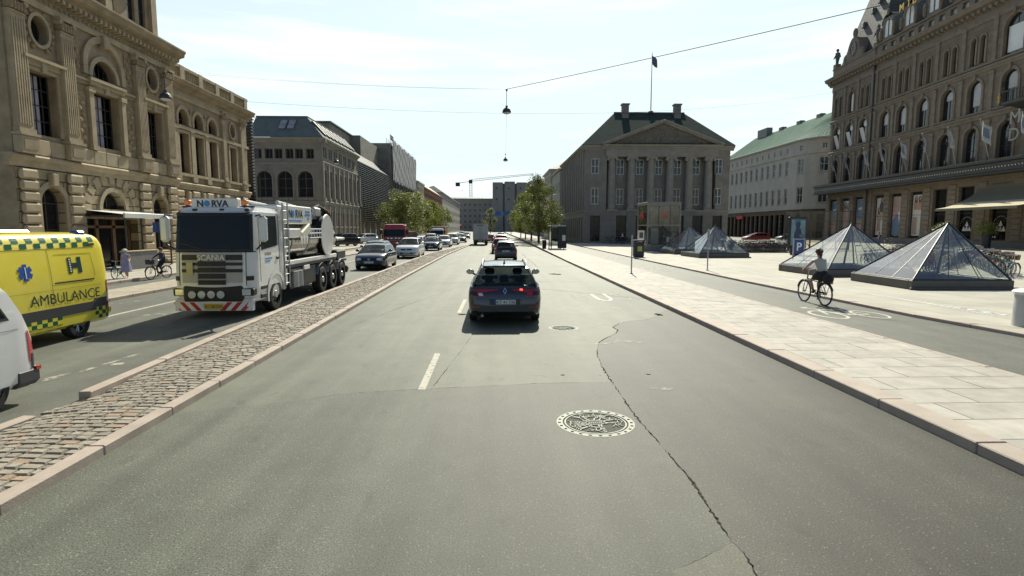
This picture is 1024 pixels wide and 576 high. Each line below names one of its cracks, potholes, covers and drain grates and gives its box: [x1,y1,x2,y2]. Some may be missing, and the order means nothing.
manhole cover [556,410,635,437]
crack [596,308,758,576]
